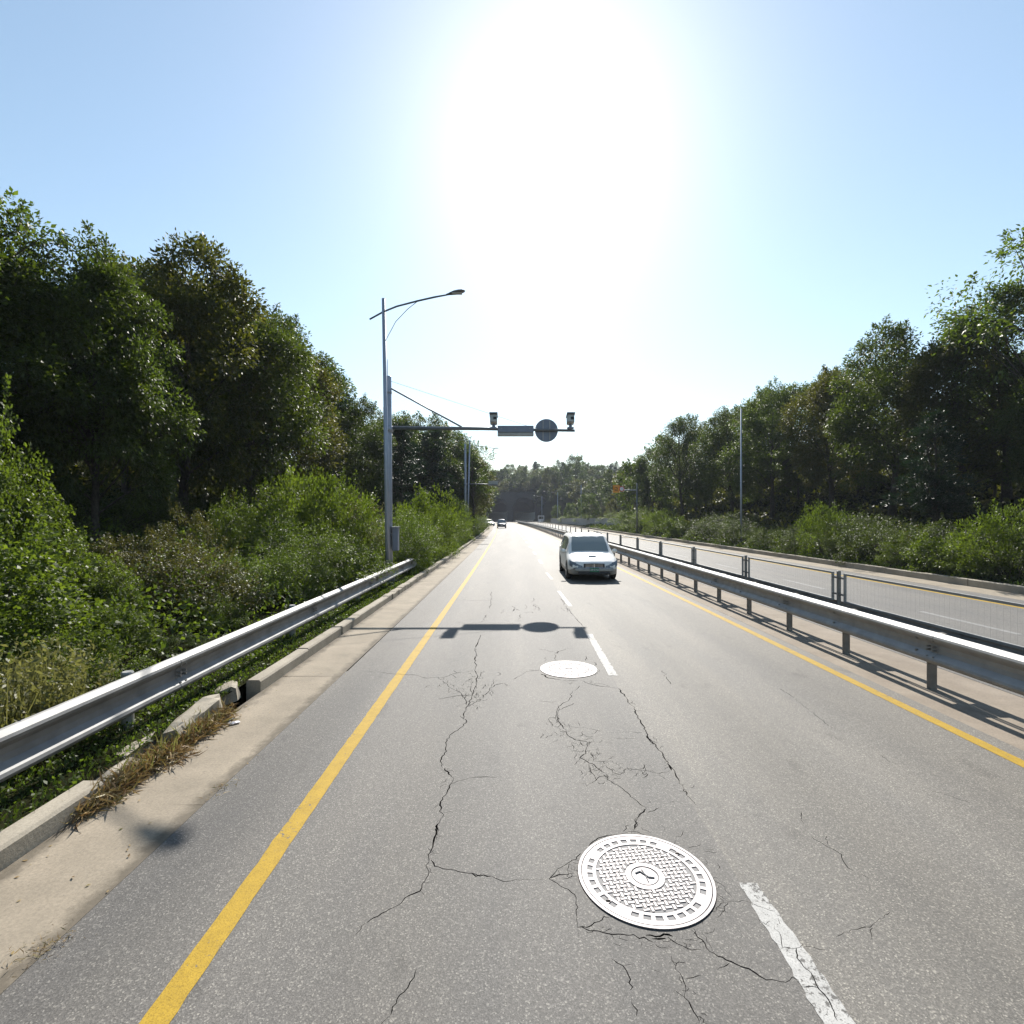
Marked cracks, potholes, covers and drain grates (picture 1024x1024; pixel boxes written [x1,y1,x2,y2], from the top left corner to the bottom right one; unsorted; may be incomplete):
crack [516,649,890,1024]
manhole cover [578,834,716,931]
crack [357,615,541,933]
crack [381,970,416,1024]
manhole cover [540,661,597,678]
